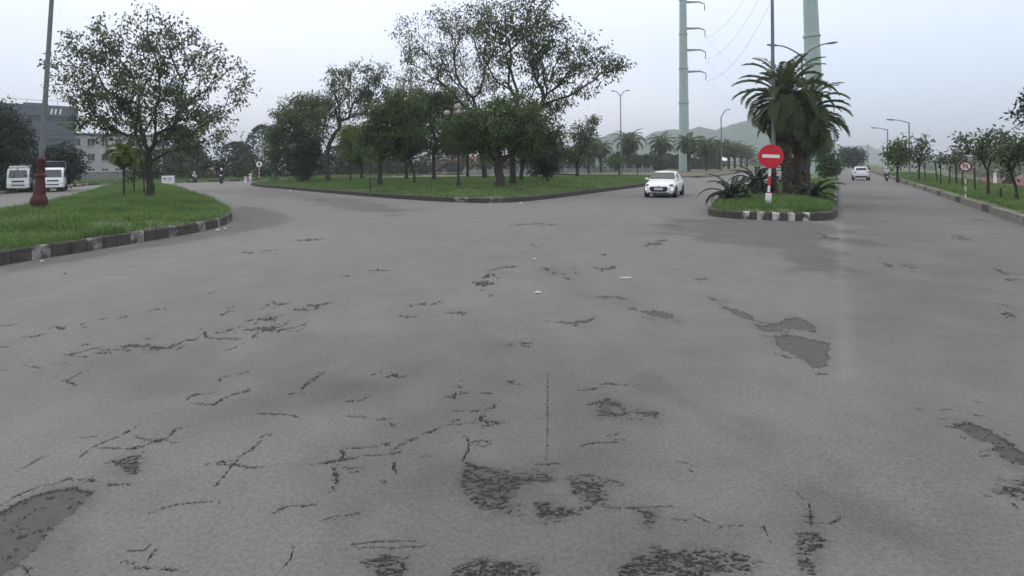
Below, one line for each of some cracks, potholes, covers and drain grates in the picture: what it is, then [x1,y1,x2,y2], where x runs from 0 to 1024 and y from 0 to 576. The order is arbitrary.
pothole [566,474,624,505]
pothole [352,540,416,576]
crack [311,386,500,490]
pothole [794,493,839,575]
pothole [577,383,659,420]
crack [398,301,464,318]
crack [595,253,616,272]
pothole [0,478,129,576]
pothole [754,317,831,375]
pothole [453,559,540,576]
crack [187,372,251,406]
